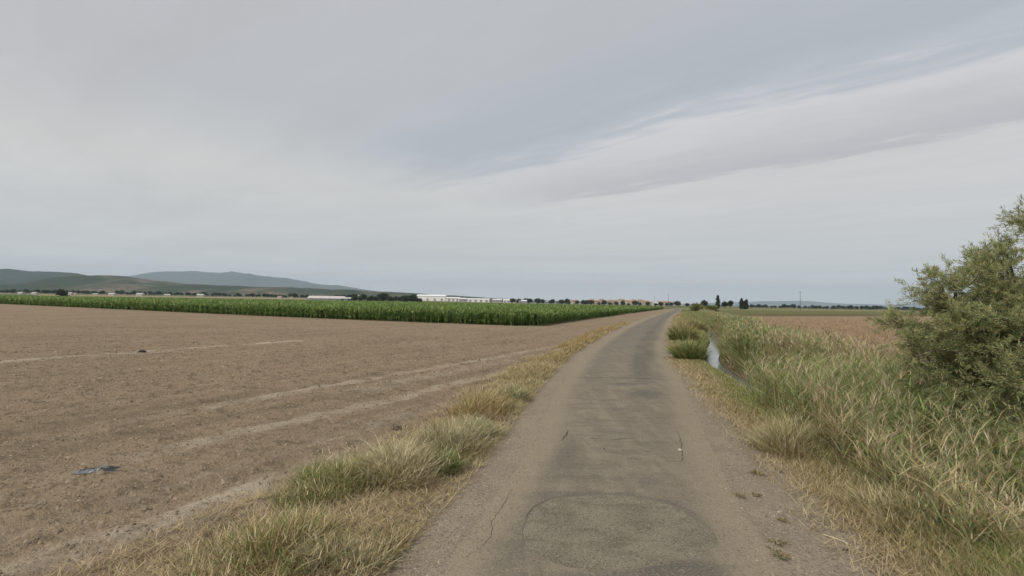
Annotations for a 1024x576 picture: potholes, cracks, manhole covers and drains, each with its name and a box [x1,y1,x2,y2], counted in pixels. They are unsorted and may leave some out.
crack [472,492,717,553]
